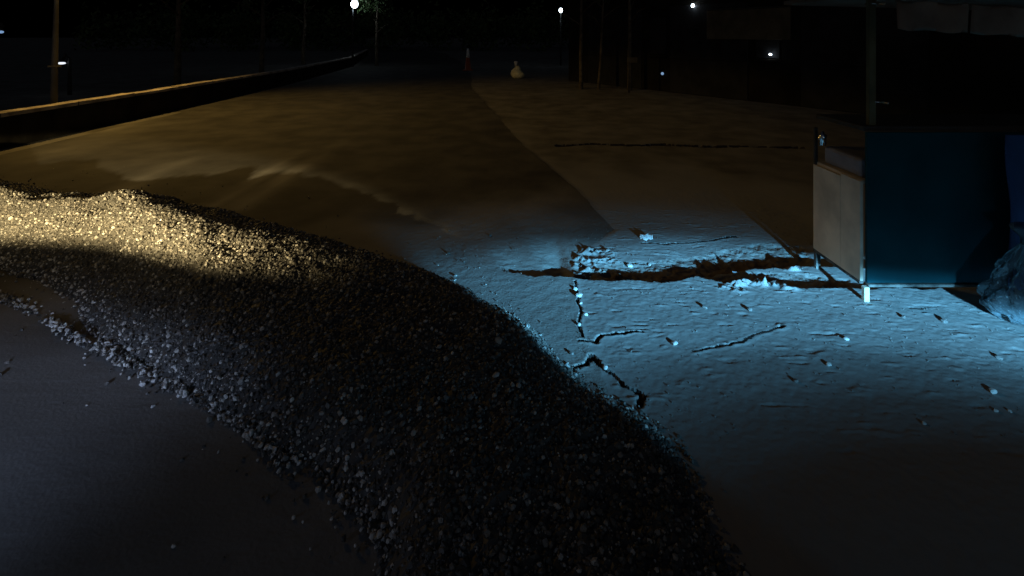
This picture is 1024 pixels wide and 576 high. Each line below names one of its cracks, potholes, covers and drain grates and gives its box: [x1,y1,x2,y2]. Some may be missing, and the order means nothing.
crack [573,330,647,409]
crack [691,324,785,352]
crack [641,236,737,245]
